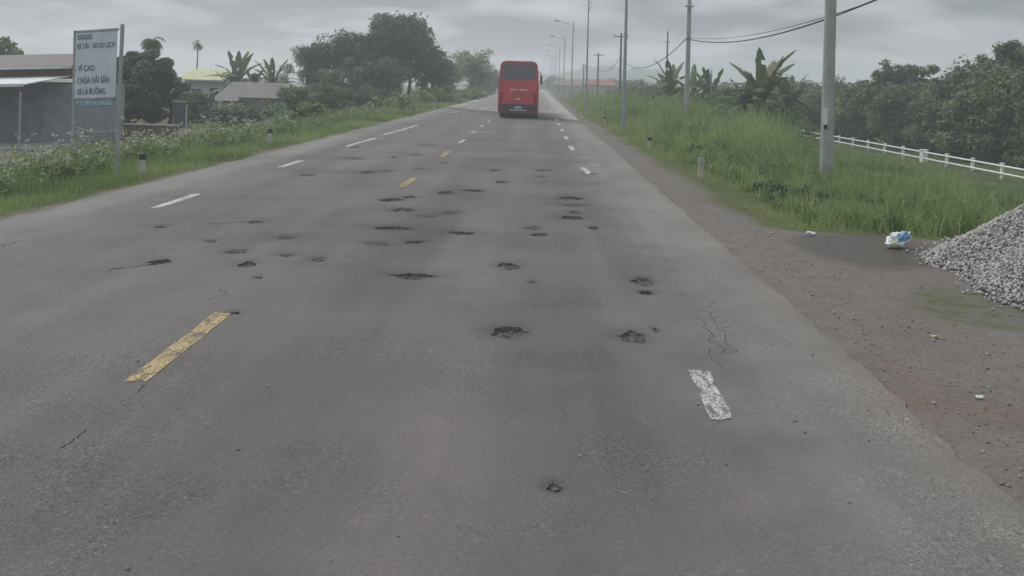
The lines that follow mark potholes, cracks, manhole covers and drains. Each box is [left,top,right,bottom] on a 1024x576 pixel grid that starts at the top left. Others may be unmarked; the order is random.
crack [698,301,737,368]
pothole [618,330,646,344]
pothole [490,326,530,338]
pothole [629,277,654,286]
pothole [546,483,563,493]
